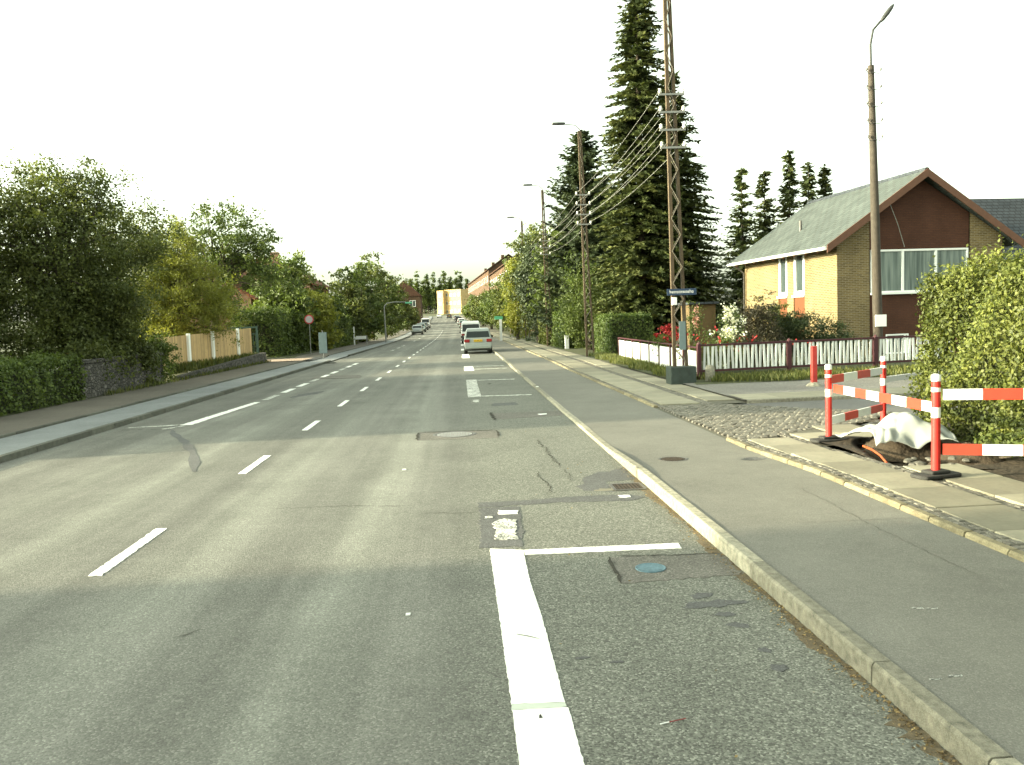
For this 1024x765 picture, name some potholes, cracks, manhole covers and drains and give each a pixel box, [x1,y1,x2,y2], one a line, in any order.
drain grate [609,482,647,491]
crack [537,440,573,492]
manhole cover [635,563,666,573]
